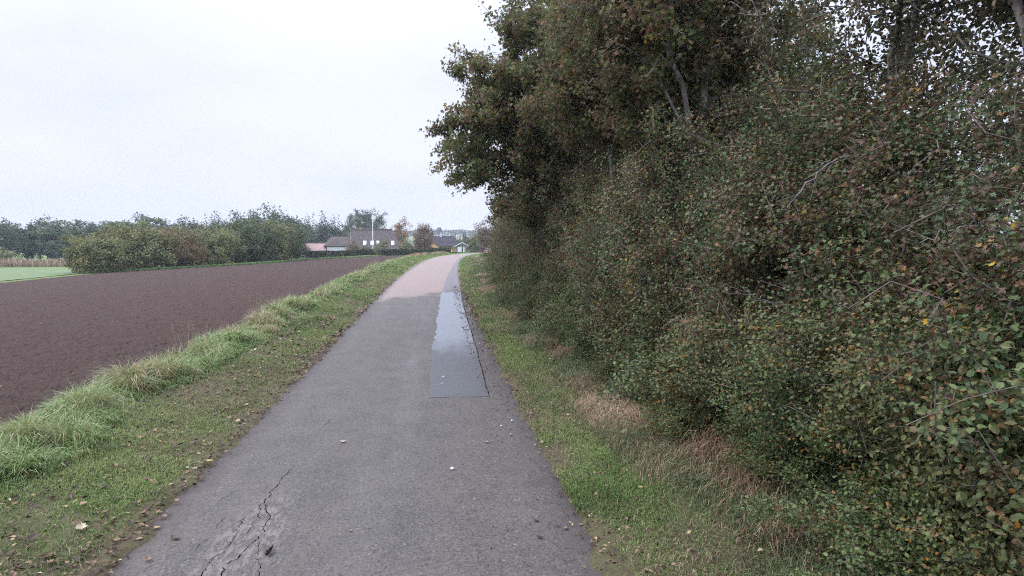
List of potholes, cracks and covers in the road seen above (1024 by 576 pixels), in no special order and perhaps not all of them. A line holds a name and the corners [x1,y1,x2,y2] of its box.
crack [195,469,292,576]
